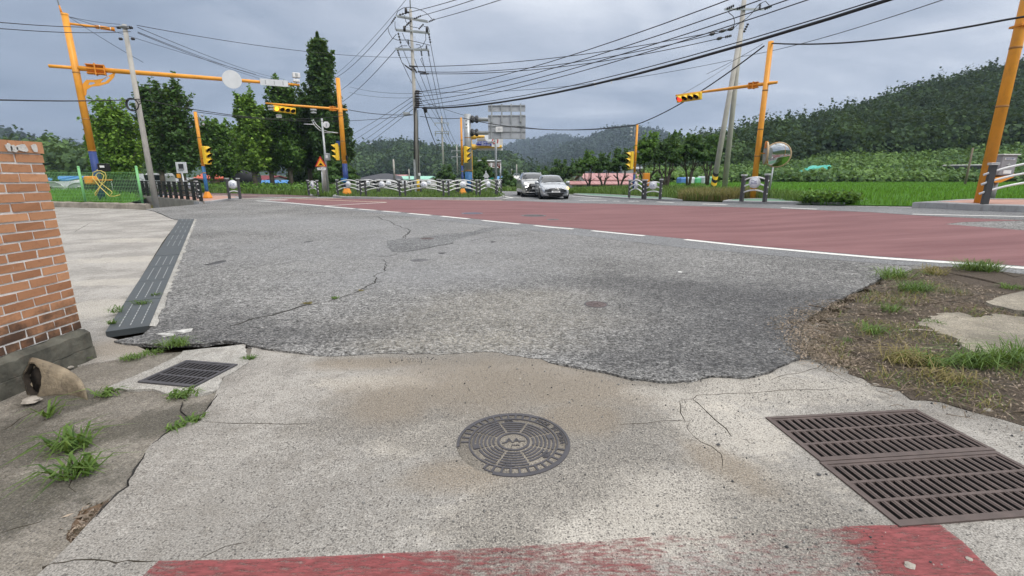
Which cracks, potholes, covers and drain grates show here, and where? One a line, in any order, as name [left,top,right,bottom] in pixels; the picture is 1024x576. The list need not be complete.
crack [231,218,454,326]
crack [42,559,153,569]
drain grate [820,450,1024,528]
drain grate [137,360,238,388]
drain grate [765,409,995,462]
manhole cover [457,413,570,477]
